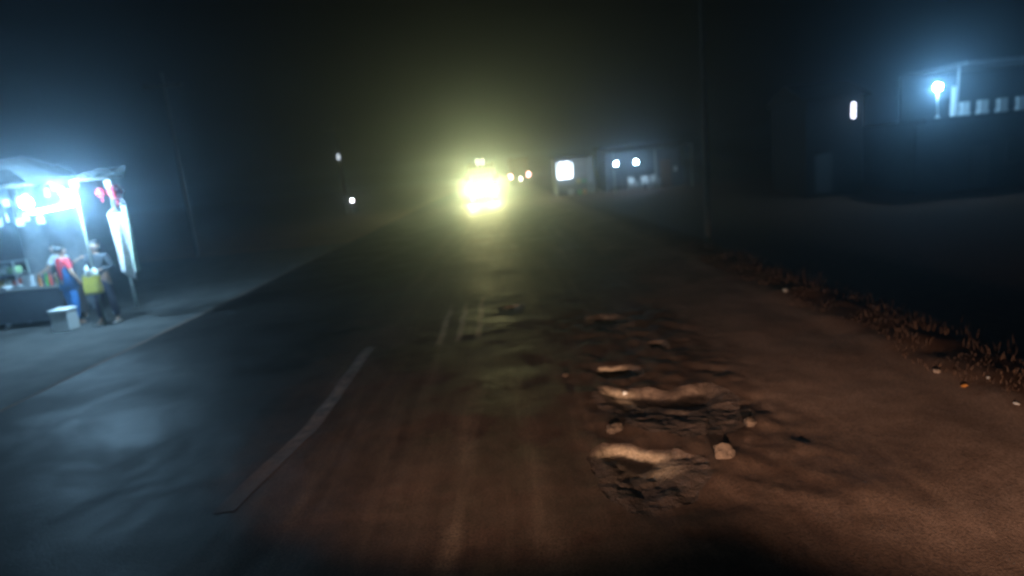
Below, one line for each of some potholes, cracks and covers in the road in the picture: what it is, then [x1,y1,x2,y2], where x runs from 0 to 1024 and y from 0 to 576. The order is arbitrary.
pothole [586,443,713,517]
pothole [498,304,525,317]
pothole [596,364,644,381]
pothole [592,382,754,437]
pothole [582,314,636,334]
